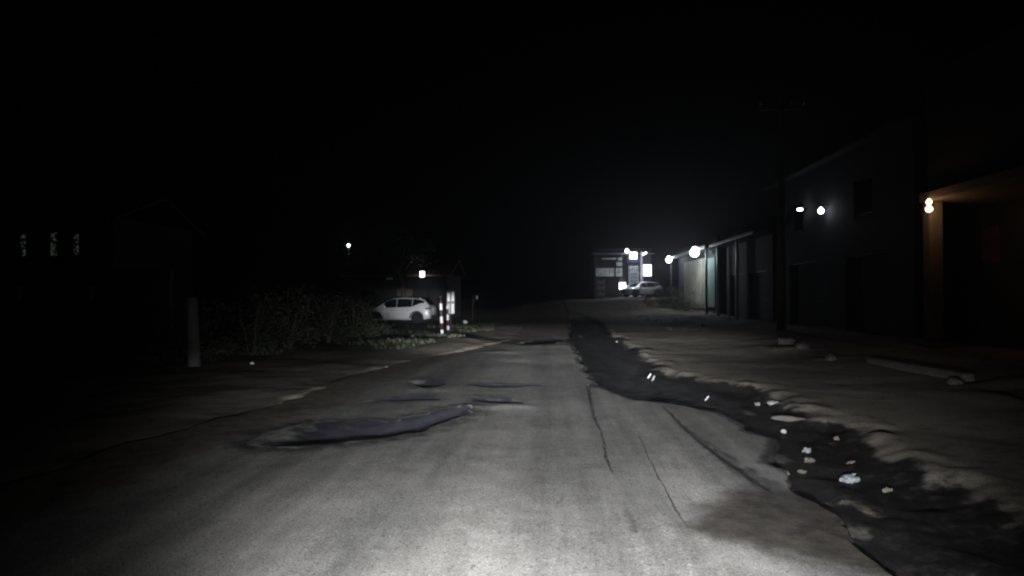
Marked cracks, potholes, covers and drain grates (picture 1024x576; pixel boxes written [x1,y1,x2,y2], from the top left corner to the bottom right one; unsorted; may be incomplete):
crack [638,406,774,527]
crack [586,384,614,474]
